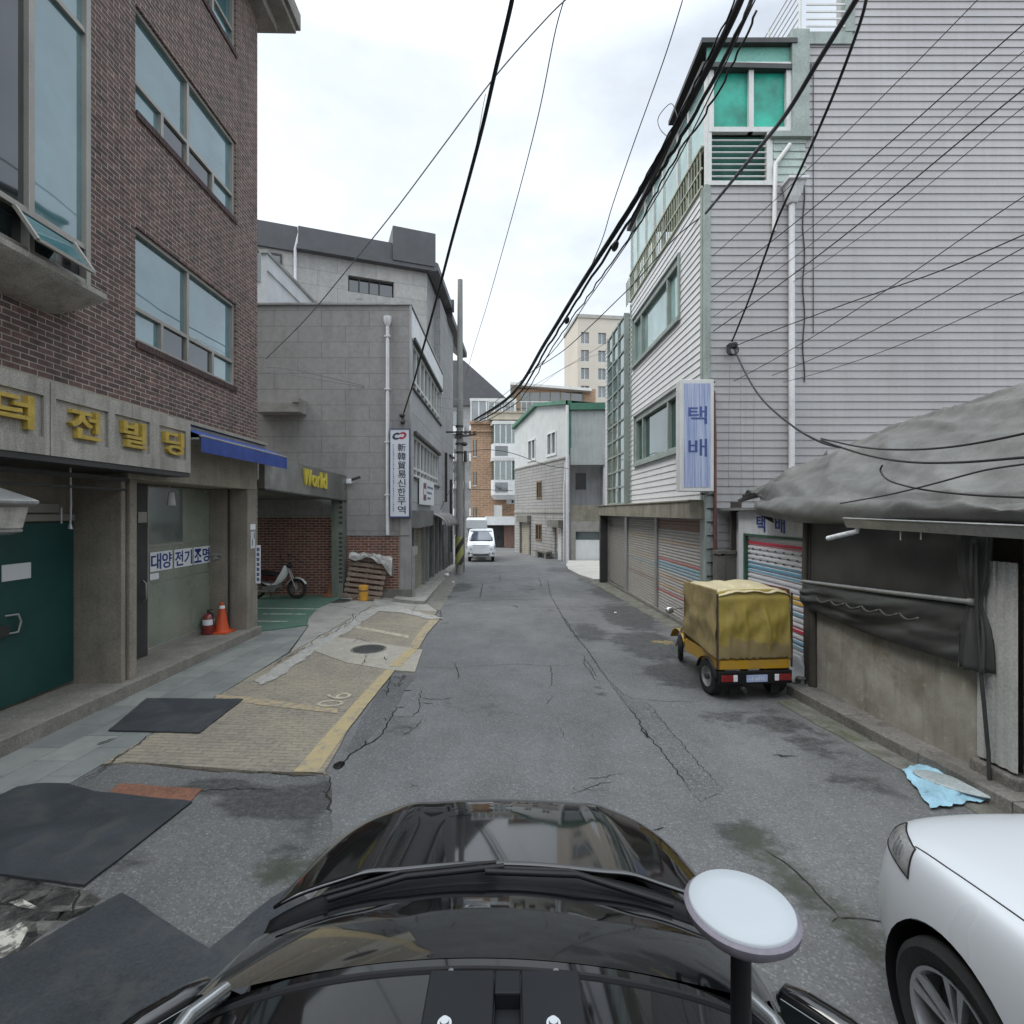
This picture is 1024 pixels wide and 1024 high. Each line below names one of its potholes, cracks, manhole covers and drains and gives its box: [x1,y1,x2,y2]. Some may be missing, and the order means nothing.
crack [766,850,879,922]
crack [275,606,603,814]
manhole cover [350,644,387,654]
crack [628,704,723,789]
